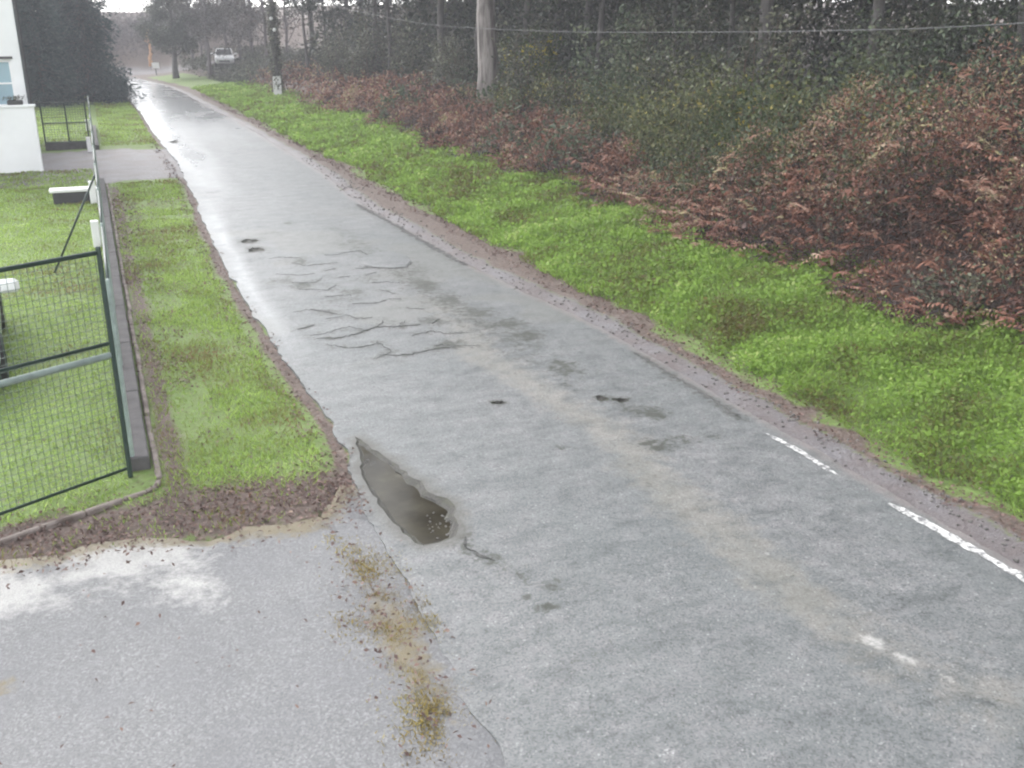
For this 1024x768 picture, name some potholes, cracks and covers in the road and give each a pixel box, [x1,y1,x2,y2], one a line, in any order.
crack [269,204,475,358]
crack [463,536,495,561]
pothole [355,437,459,546]
